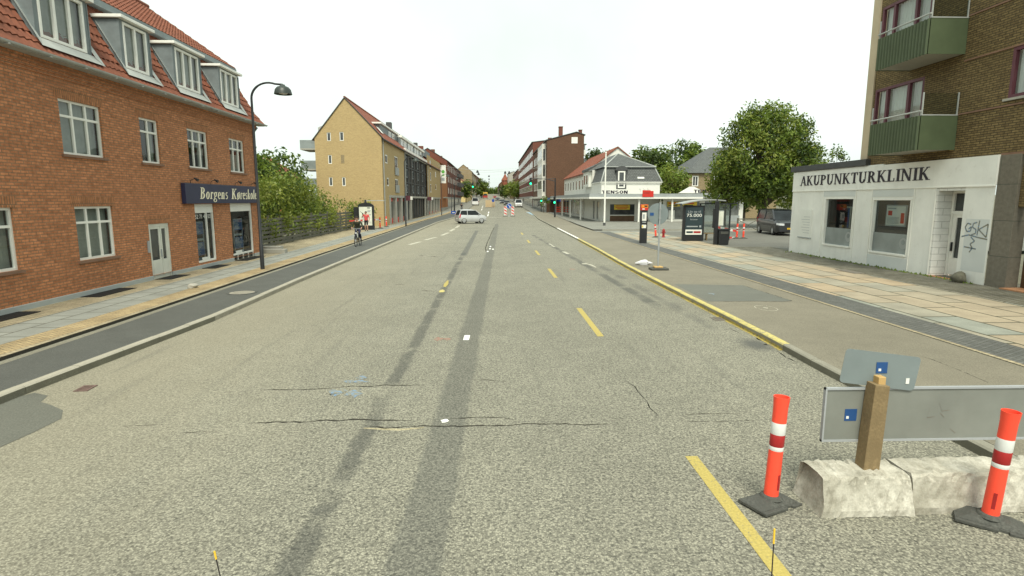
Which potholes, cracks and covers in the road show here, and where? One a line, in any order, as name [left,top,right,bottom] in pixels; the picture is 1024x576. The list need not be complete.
drain grate [82,288,135,297]
crack [258,417,601,431]
